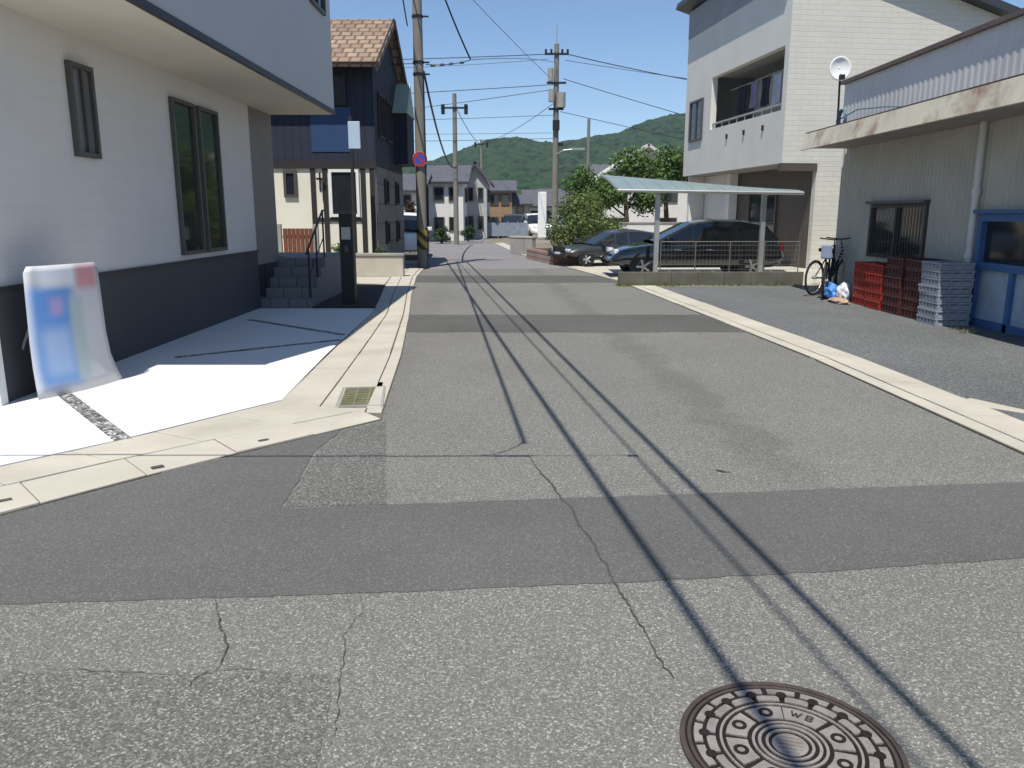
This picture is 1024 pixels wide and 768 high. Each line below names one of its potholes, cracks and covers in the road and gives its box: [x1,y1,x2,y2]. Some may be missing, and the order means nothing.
drain grate [335,386,386,408]
crack [331,600,364,738]
crack [41,600,258,686]
crack [528,455,674,677]
manhole cover [679,682,910,768]
